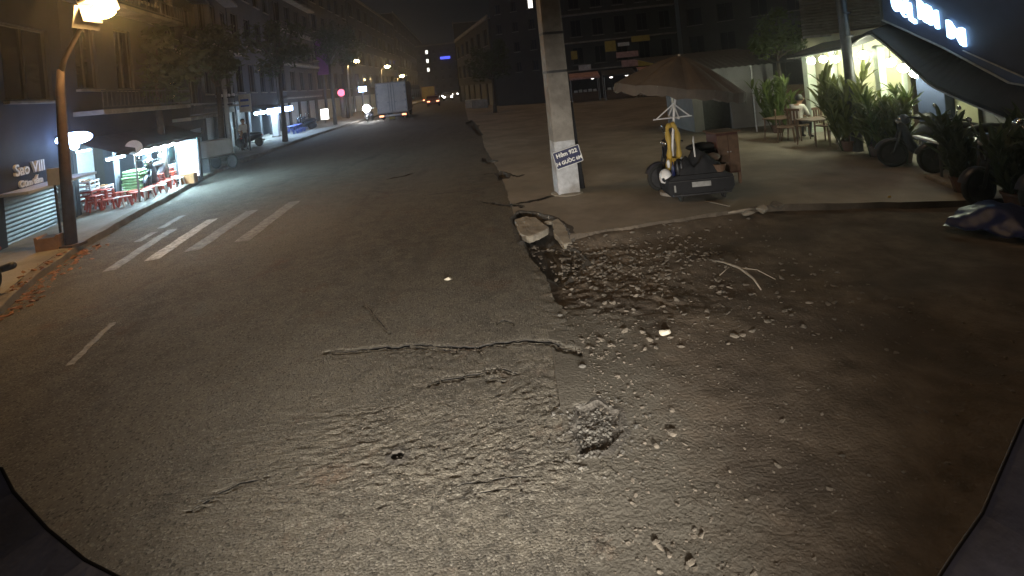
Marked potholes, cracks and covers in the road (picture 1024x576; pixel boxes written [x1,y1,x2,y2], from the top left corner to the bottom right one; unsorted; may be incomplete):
pothole [384,446,410,465]
crack [329,303,582,386]
pothole [509,210,593,289]
pothole [565,396,631,460]
crack [479,195,554,208]
